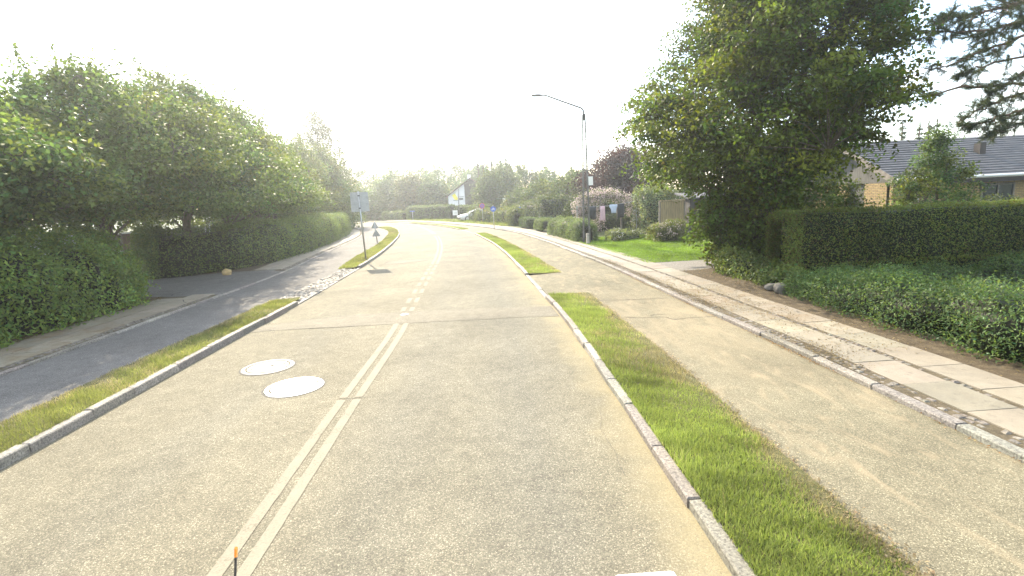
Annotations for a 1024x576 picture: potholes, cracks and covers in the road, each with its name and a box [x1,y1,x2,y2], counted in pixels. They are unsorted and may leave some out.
manhole cover [239,359,296,376]
manhole cover [261,377,326,398]
